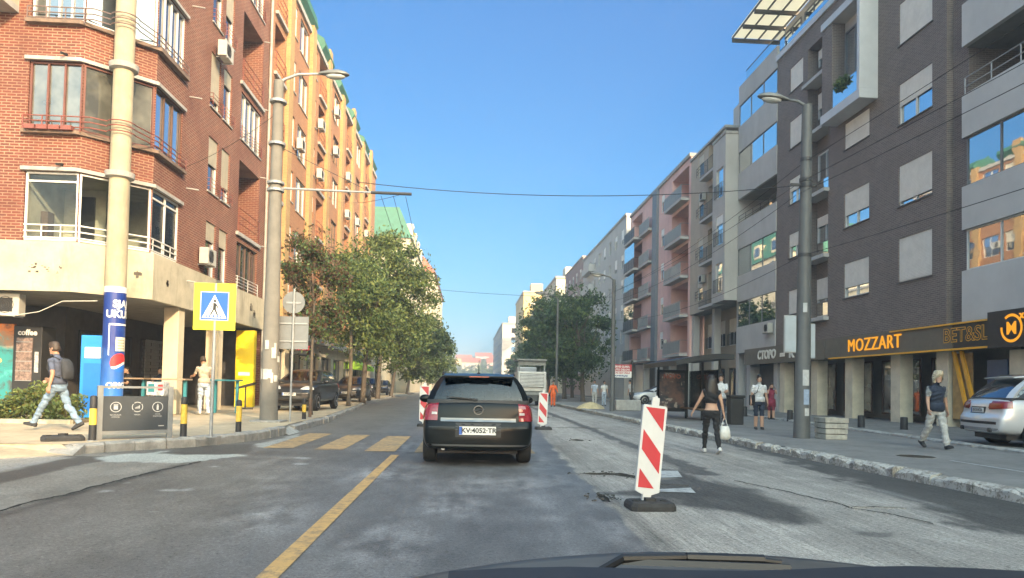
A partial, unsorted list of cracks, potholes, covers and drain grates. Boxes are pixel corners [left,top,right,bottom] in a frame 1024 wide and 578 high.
pothole [584,492,622,504]
crack [734,480,933,524]
